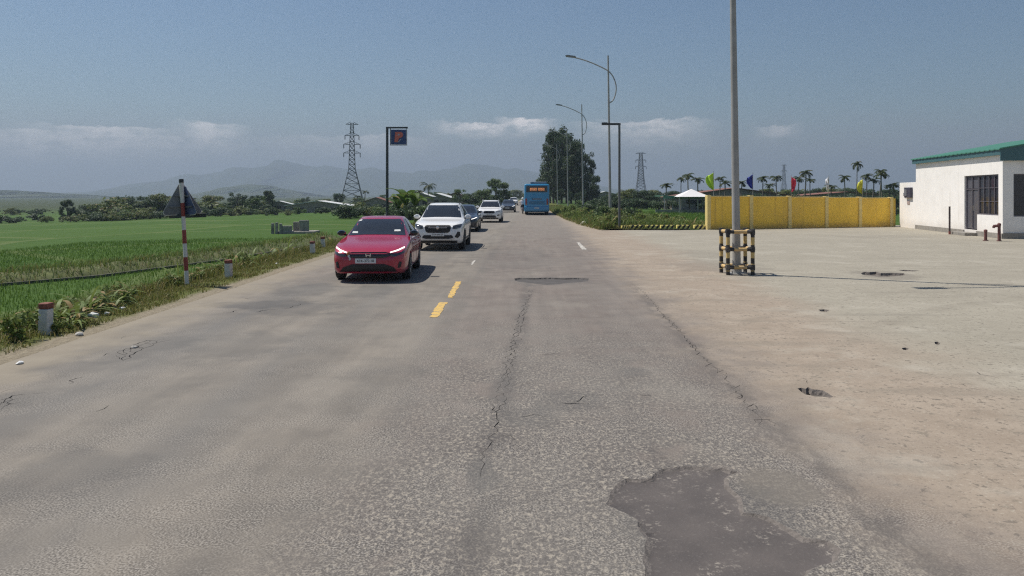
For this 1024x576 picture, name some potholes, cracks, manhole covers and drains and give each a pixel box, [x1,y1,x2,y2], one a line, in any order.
crack [105,338,157,360]
crack [638,287,776,426]
crack [481,290,533,470]
pothole [798,387,833,398]
